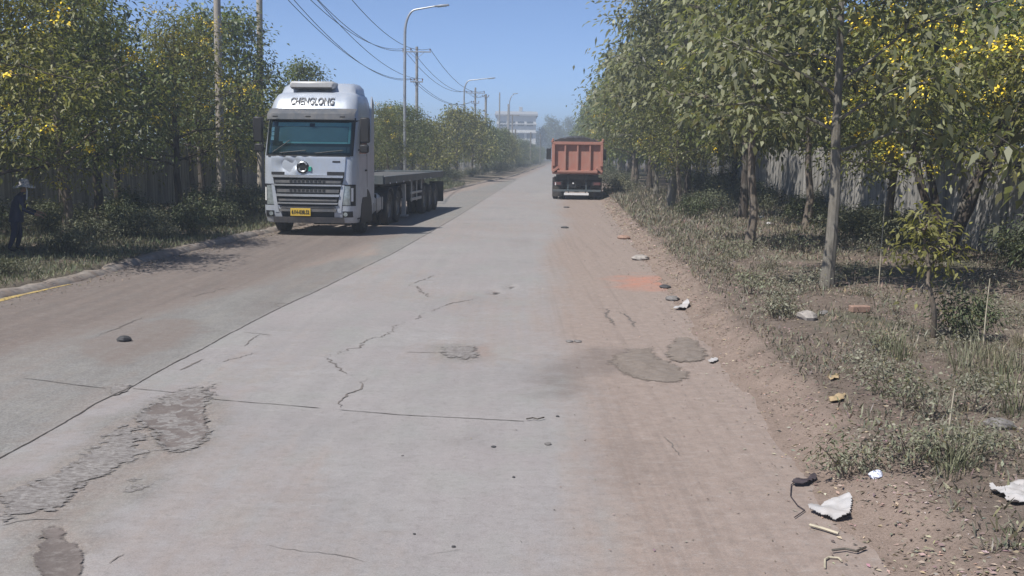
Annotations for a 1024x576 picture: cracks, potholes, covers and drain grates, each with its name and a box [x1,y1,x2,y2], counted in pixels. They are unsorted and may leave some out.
crack [325,275,467,407]
pothole [137,395,209,447]
